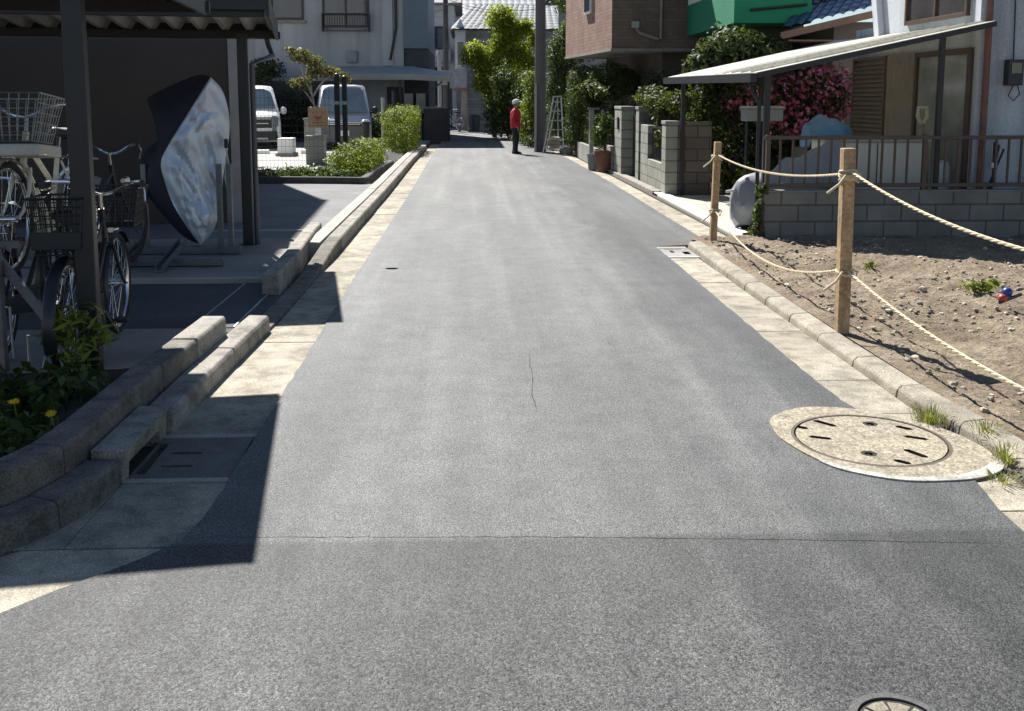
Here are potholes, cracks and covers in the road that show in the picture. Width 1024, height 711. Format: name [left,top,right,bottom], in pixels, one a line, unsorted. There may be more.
manhole cover [770,407,1004,482]
manhole cover [849,693,936,711]
drain grate [657,247,700,259]
drain grate [91,406,257,485]
